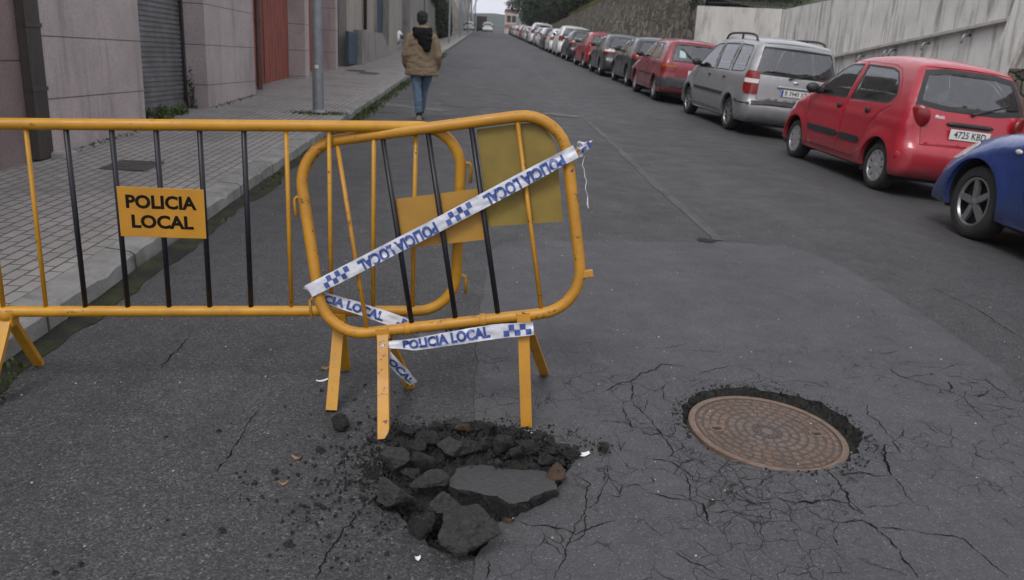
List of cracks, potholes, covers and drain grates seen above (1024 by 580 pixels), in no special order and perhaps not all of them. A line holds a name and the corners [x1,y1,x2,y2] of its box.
crack [522,343,1003,578]
manhole cover [99,160,165,172]
crack [315,506,365,577]
crack [217,412,256,483]
pothole [374,421,580,557]
manhole cover [687,396,849,471]
